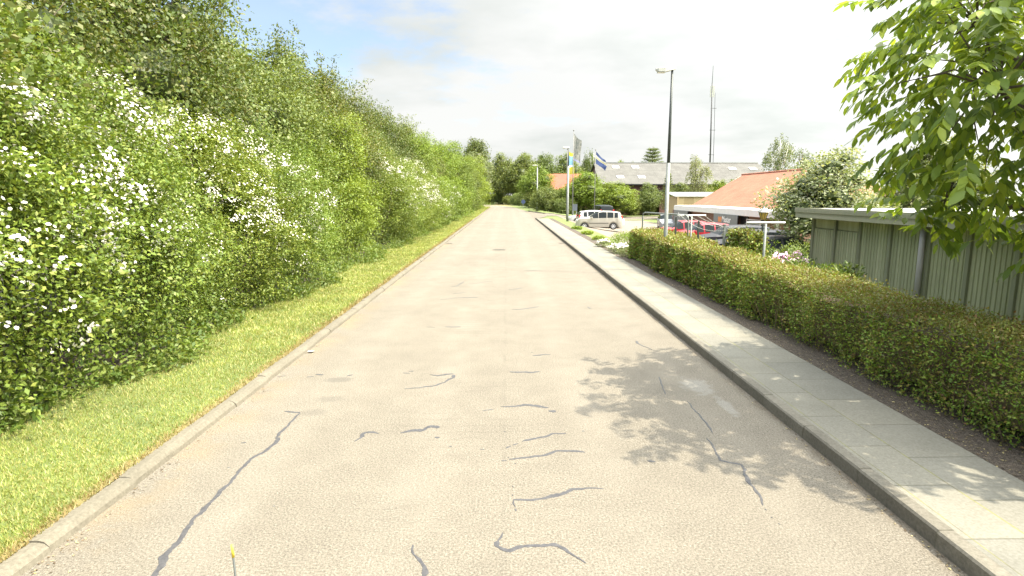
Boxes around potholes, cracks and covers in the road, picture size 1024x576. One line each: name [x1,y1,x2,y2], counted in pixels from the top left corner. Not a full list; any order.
crack [659,377,780,525]
crack [405,371,455,389]
crack [354,431,379,442]
